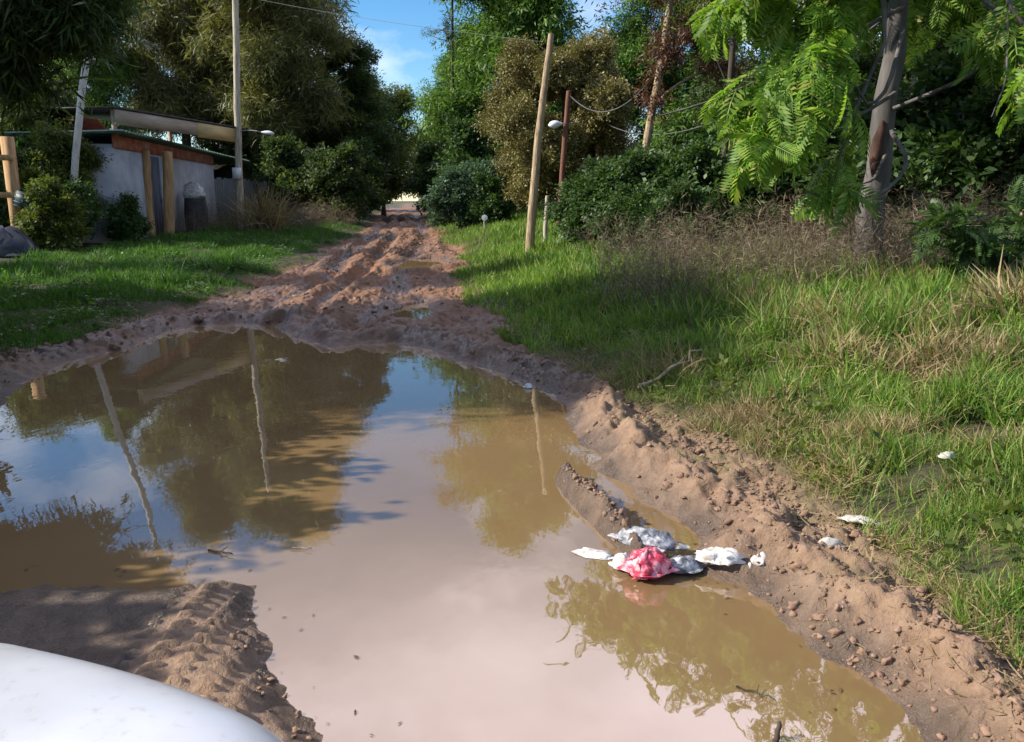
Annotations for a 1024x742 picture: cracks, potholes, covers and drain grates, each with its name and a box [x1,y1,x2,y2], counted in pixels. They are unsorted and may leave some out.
pothole [386,299,436,319]
pothole [0,317,954,742]
